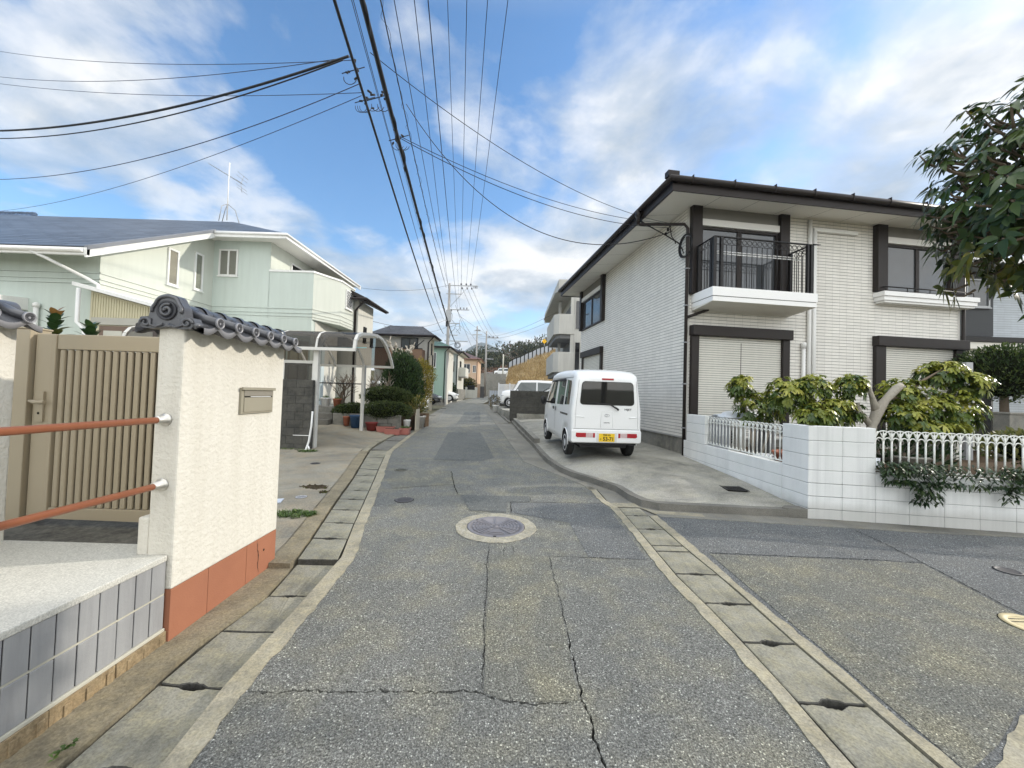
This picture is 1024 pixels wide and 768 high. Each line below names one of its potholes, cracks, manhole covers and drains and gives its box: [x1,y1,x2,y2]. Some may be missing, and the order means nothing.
crack [262,547,490,695]
crack [550,556,624,768]
manhole cover [992,566,1024,576]
manhole cover [455,513,537,543]
